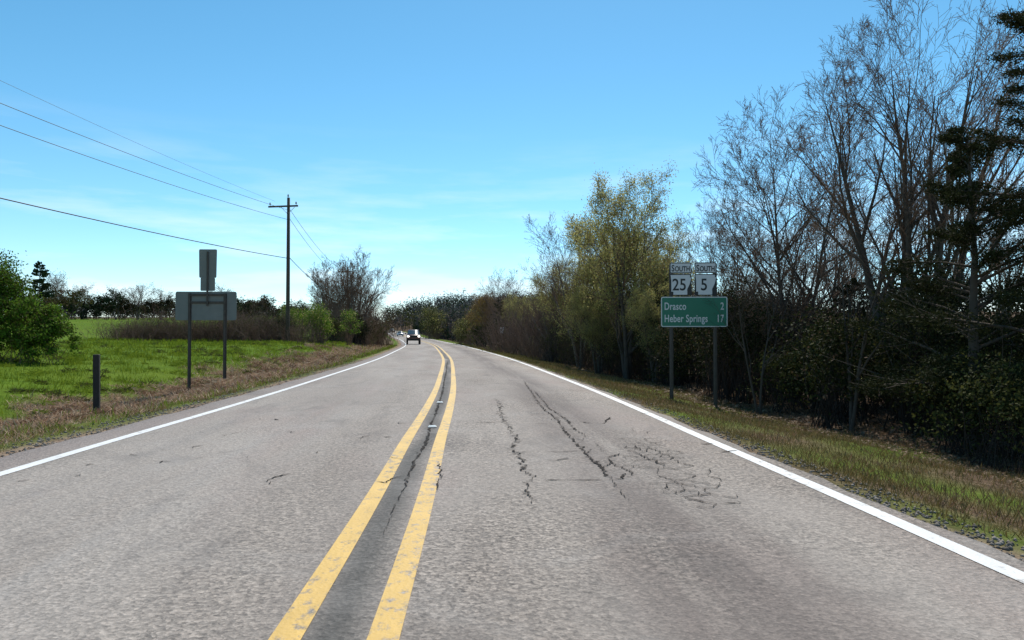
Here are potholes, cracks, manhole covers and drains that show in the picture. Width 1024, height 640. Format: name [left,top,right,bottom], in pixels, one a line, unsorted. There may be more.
crack [496,382,738,512]
